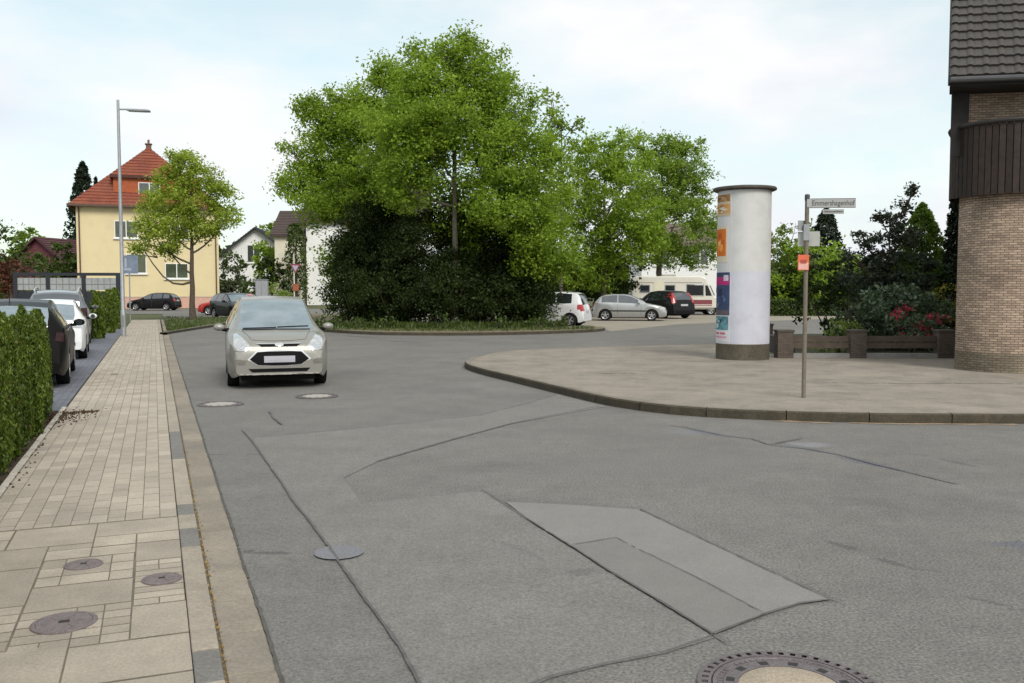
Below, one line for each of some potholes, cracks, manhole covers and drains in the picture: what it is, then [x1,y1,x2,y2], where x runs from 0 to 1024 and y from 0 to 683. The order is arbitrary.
manhole cover [697,651,877,683]
utility cover [29,611,98,635]
utility cover [63,558,103,570]
utility cover [141,572,182,586]
